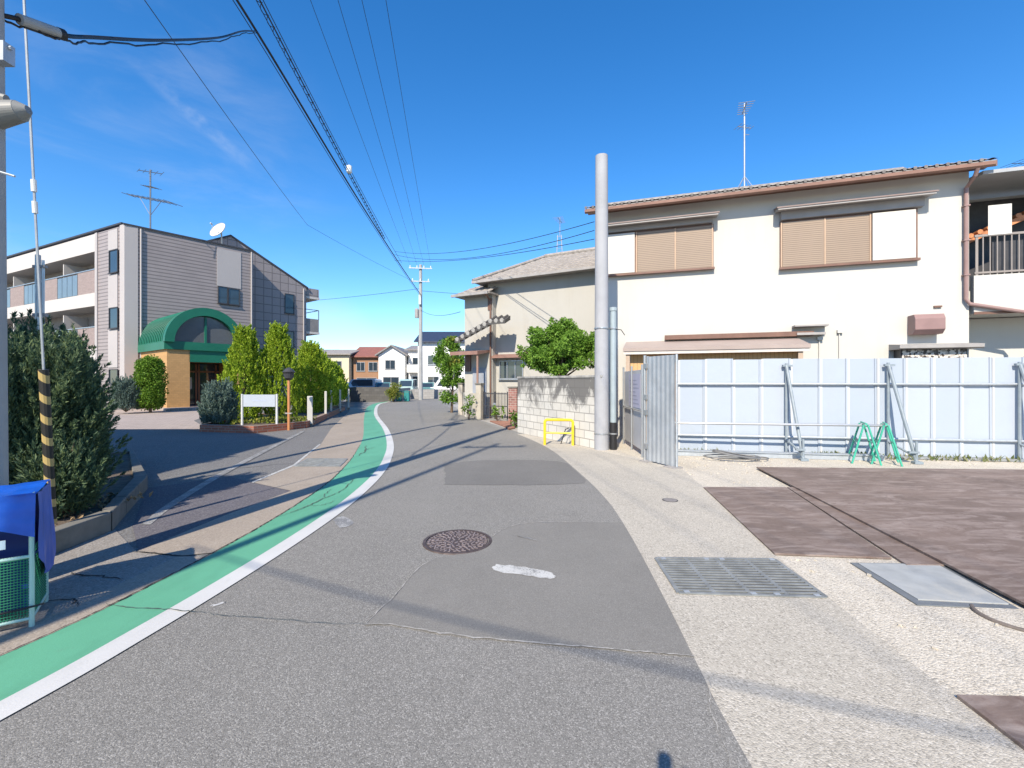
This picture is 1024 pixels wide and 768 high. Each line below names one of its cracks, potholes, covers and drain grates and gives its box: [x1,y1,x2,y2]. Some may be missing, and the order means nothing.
drain grate [654,557,828,598]
manhole cover [422,529,492,555]
utility cover [850,562,1019,609]
